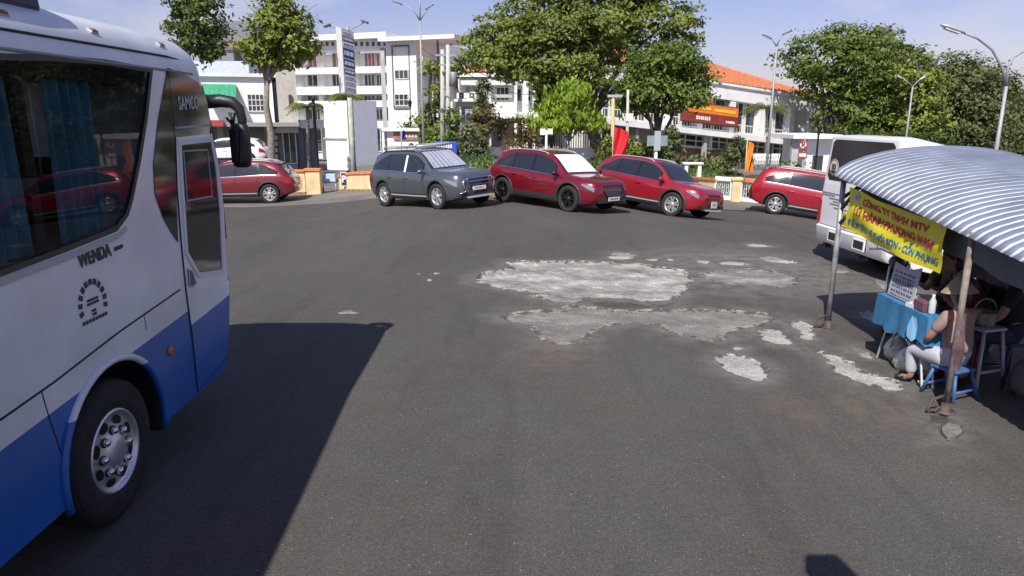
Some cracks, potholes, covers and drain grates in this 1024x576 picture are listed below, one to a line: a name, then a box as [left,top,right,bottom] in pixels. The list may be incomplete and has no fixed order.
pothole [476,260,695,303]
pothole [713,353,771,381]
pothole [698,268,799,287]
pothole [758,329,792,345]
pothole [817,351,903,392]
pothole [852,347,874,359]
pothole [791,321,816,340]
pothole [499,304,778,346]
